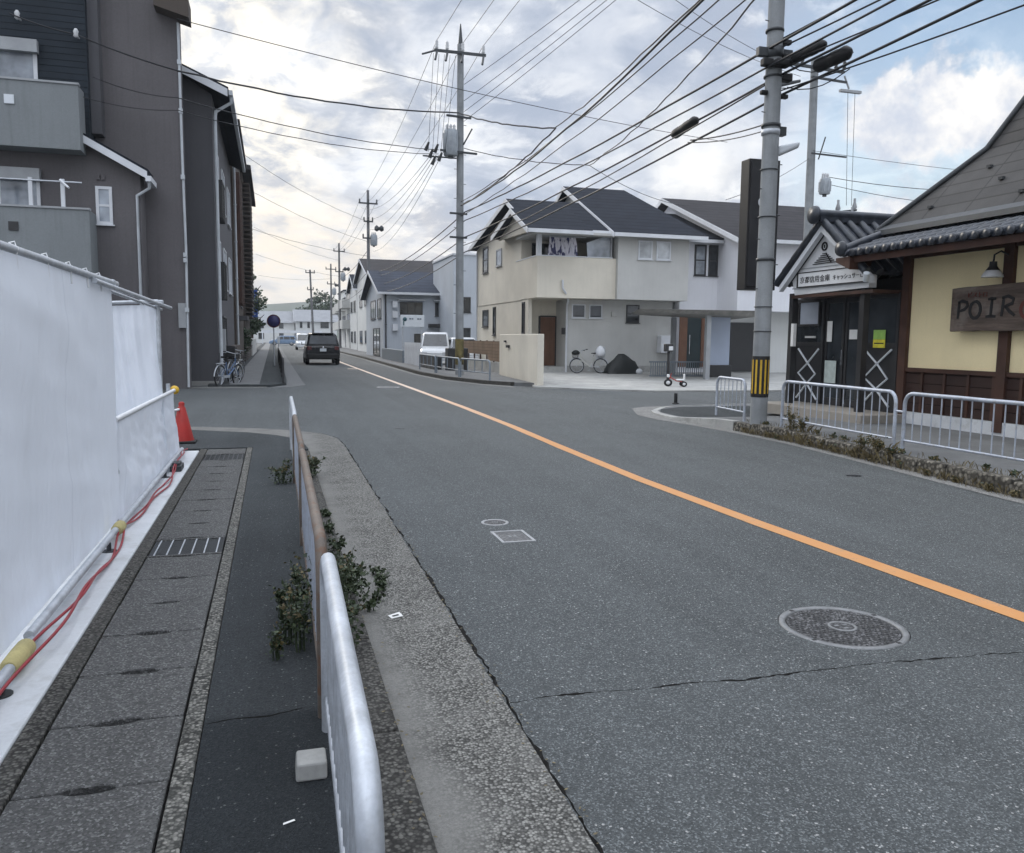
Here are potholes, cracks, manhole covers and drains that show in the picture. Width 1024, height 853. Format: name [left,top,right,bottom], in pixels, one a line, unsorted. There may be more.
drain grate [202,453,245,462]
drain grate [147,536,226,558]
crack [510,652,1022,703]
manhole cover [490,530,536,543]
manhole cover [778,606,911,650]
crack [208,706,314,724]
